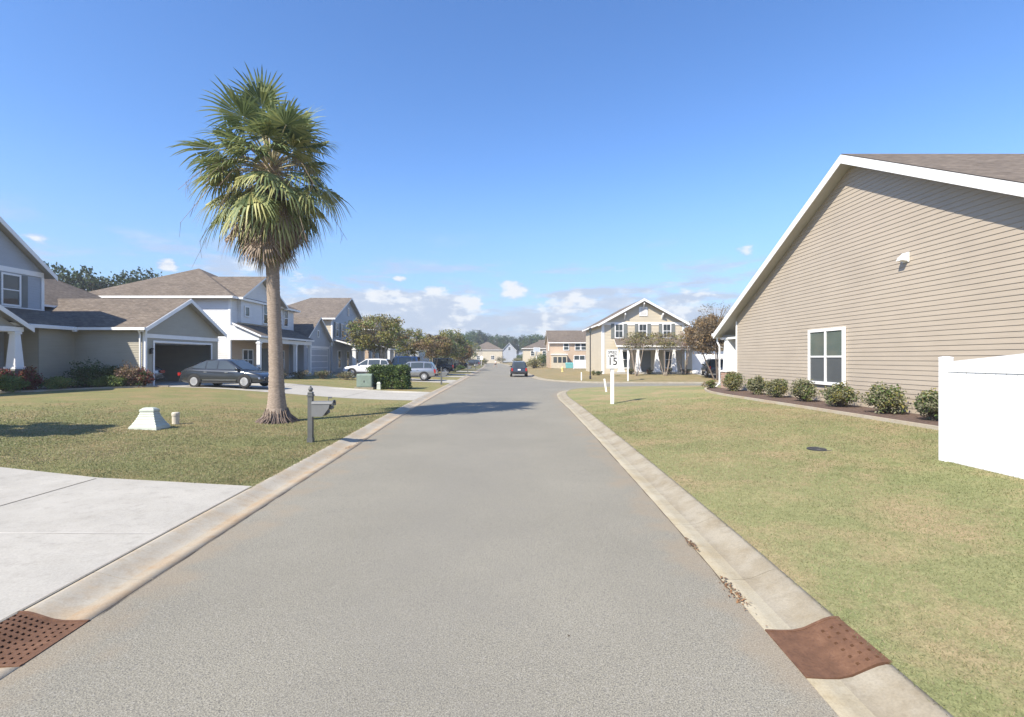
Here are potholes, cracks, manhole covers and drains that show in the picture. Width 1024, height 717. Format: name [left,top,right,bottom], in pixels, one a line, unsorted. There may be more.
drain grate [0,611,90,668]
drain grate [765,616,892,679]
